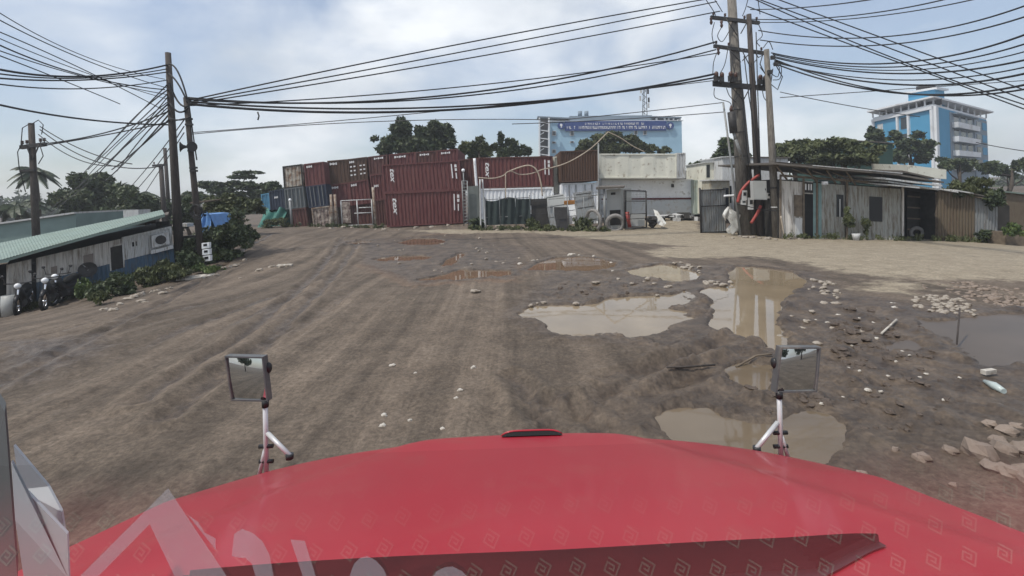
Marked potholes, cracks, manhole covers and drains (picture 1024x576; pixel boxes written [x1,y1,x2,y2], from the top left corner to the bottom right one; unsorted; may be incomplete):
pothole [713,356,775,393]
pothole [912,308,1024,368]
pothole [523,256,620,271]
pothole [438,252,467,266]
pothole [396,237,449,245]
pothole [514,286,728,338]
pothole [621,262,704,282]
pothole [695,265,812,350]
pothole [416,268,514,281]
pothole [649,395,862,466]
